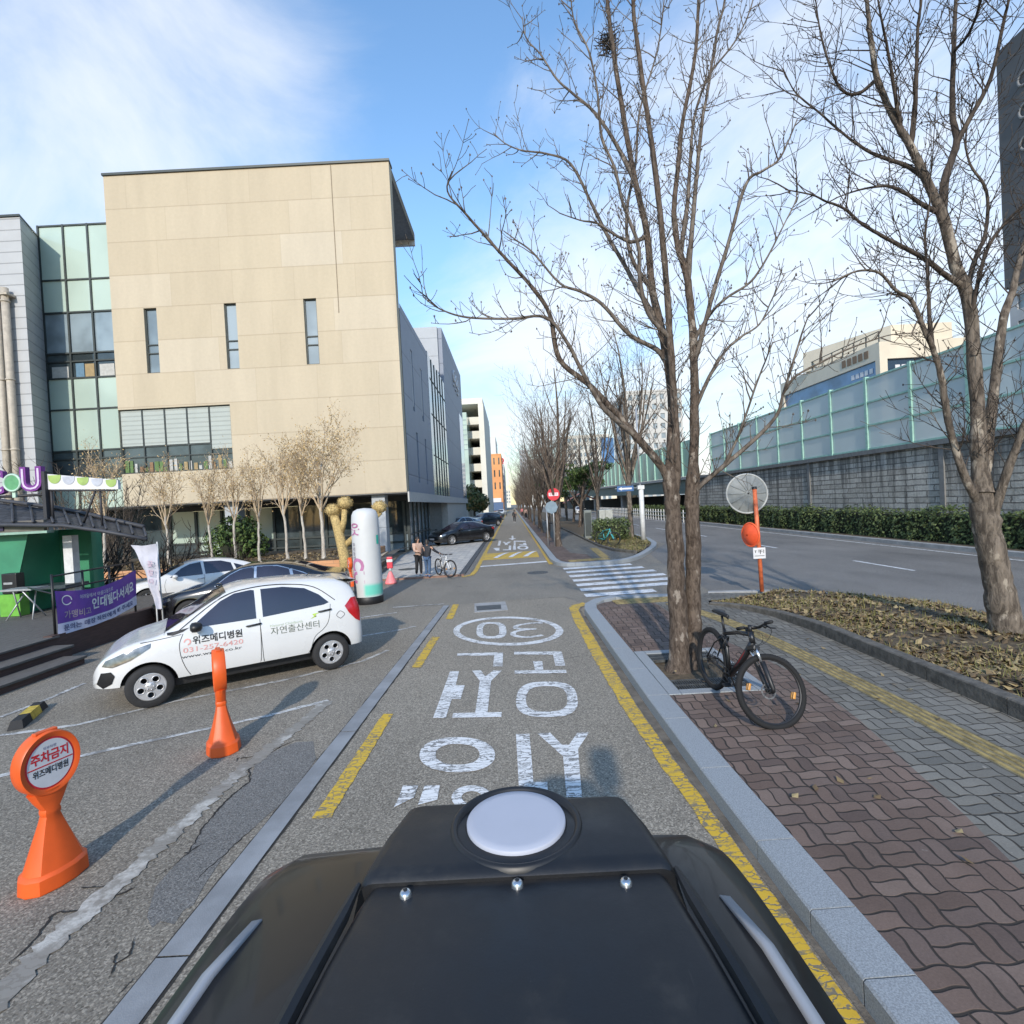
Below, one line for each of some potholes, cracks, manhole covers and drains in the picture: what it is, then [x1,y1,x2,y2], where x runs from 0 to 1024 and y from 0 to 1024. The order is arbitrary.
crack [156,740,296,879]
crack [108,937,135,994]
crack [9,885,135,964]
